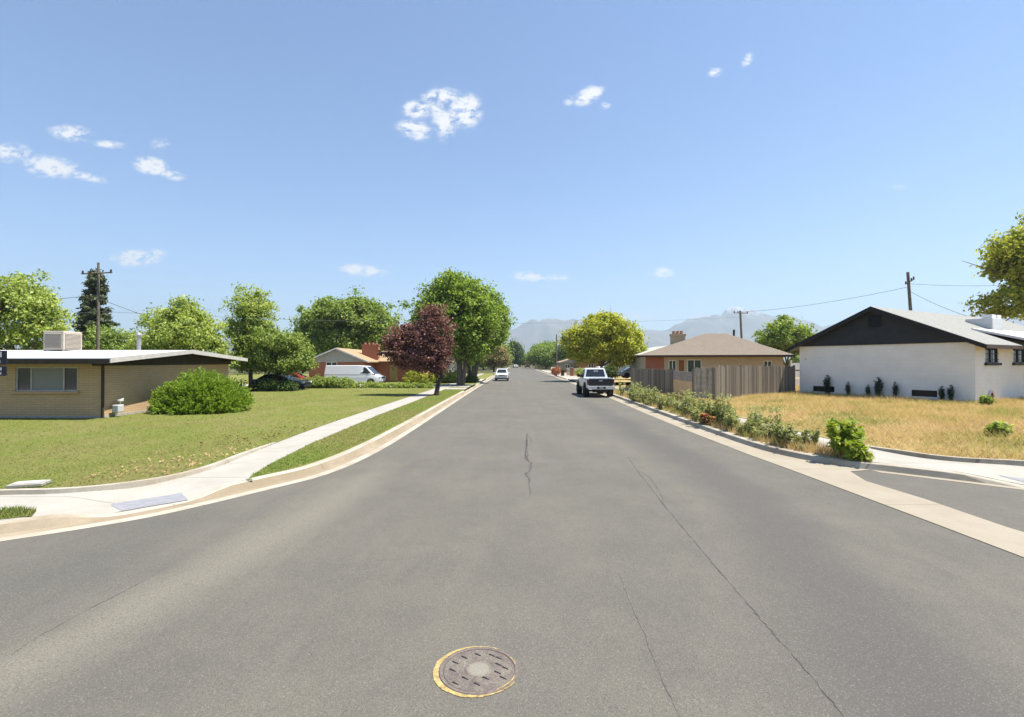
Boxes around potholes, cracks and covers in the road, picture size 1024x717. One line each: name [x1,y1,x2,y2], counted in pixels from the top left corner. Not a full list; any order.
manhole cover [433,646,518,697]
crack [524,433,532,493]
